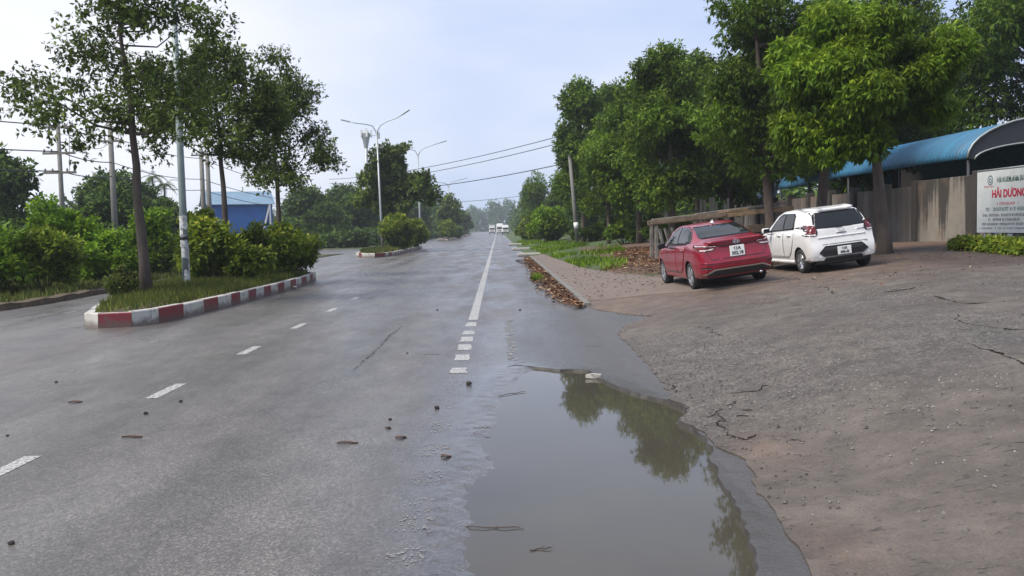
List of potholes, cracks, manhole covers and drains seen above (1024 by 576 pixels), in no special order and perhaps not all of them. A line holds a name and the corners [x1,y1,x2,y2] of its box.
crack [707,385,768,440]
